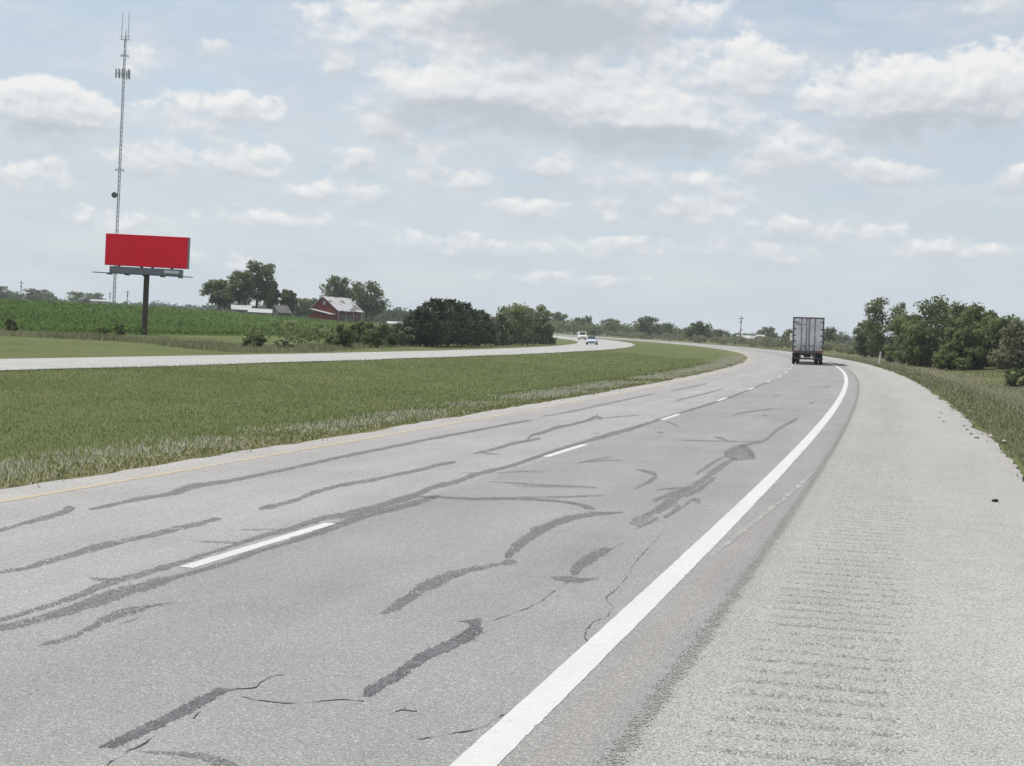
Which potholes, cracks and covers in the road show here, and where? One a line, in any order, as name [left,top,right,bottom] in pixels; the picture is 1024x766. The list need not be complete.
crack [235,674,364,703]
crack [584,537,658,641]
